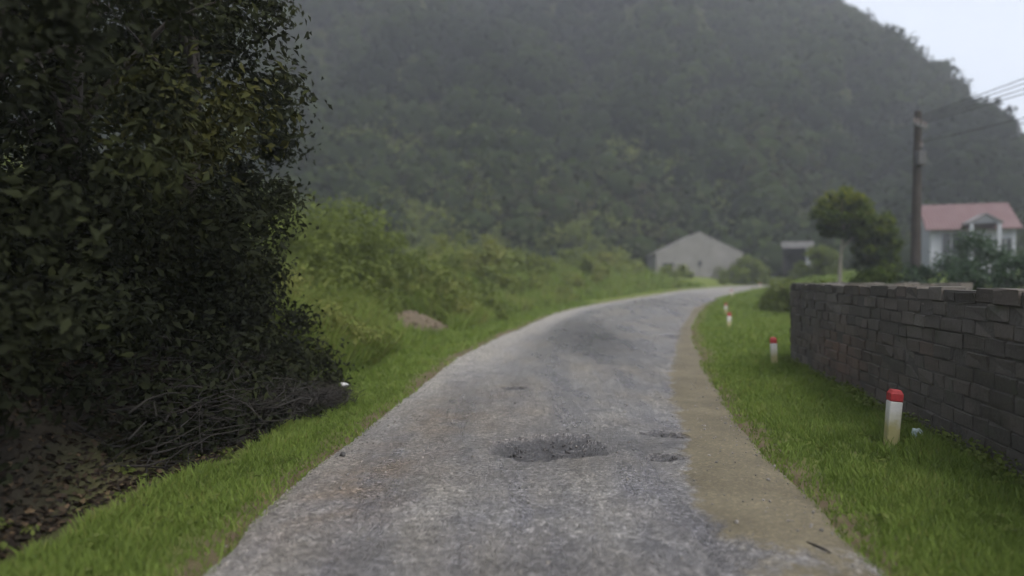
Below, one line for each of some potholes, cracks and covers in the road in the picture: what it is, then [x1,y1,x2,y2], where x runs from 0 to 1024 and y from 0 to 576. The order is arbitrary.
pothole [487,432,609,462]
pothole [646,453,691,462]
pothole [637,430,693,439]
